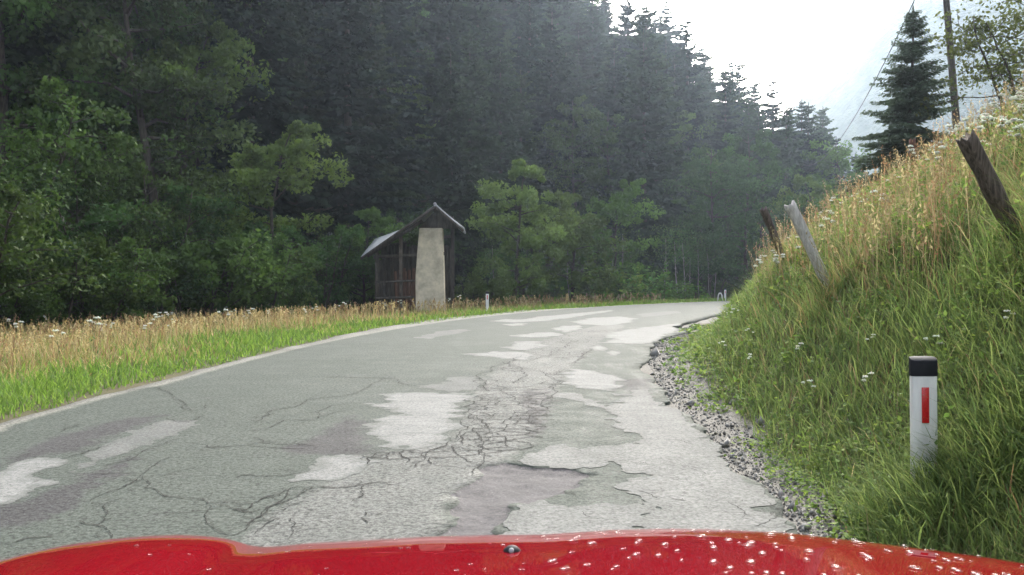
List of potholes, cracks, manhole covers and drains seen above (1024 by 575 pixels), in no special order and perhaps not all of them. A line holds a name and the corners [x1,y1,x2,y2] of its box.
pothole [440,463,589,536]
crack [65,330,620,538]
